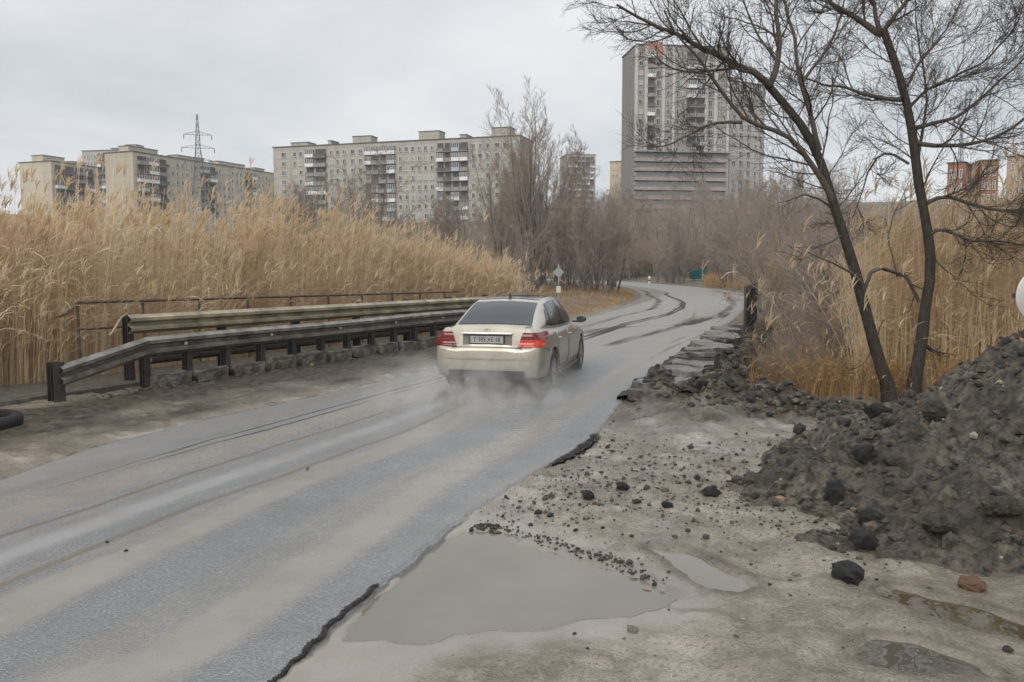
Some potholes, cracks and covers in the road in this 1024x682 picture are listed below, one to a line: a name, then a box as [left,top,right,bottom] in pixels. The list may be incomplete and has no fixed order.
pothole [346,532,672,645]
